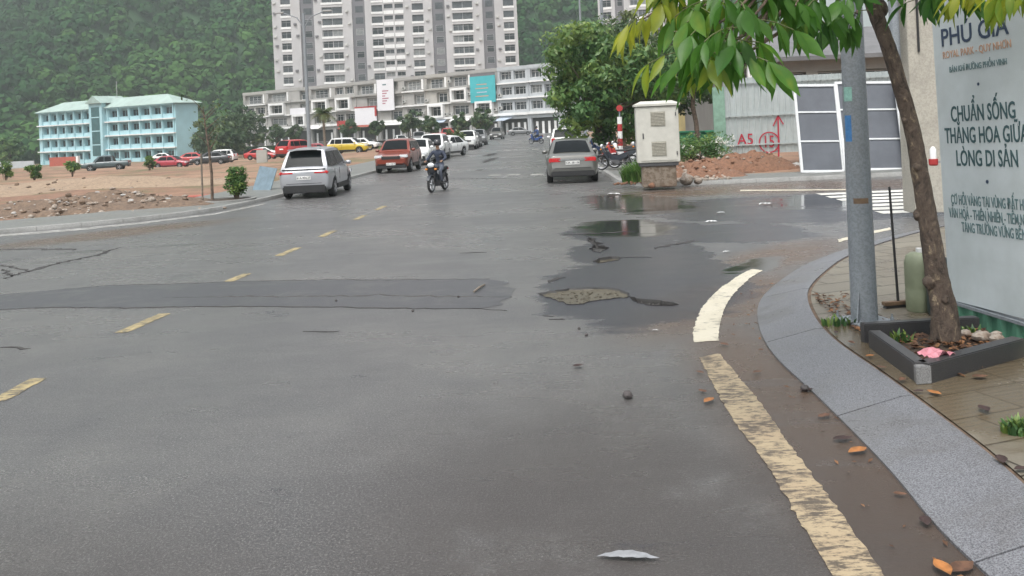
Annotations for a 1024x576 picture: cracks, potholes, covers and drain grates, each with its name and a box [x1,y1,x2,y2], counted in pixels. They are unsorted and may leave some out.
pothole [630,296,678,306]
crack [0,247,121,279]
pothole [538,287,629,305]
pothole [587,236,610,253]
crack [623,240,694,258]
